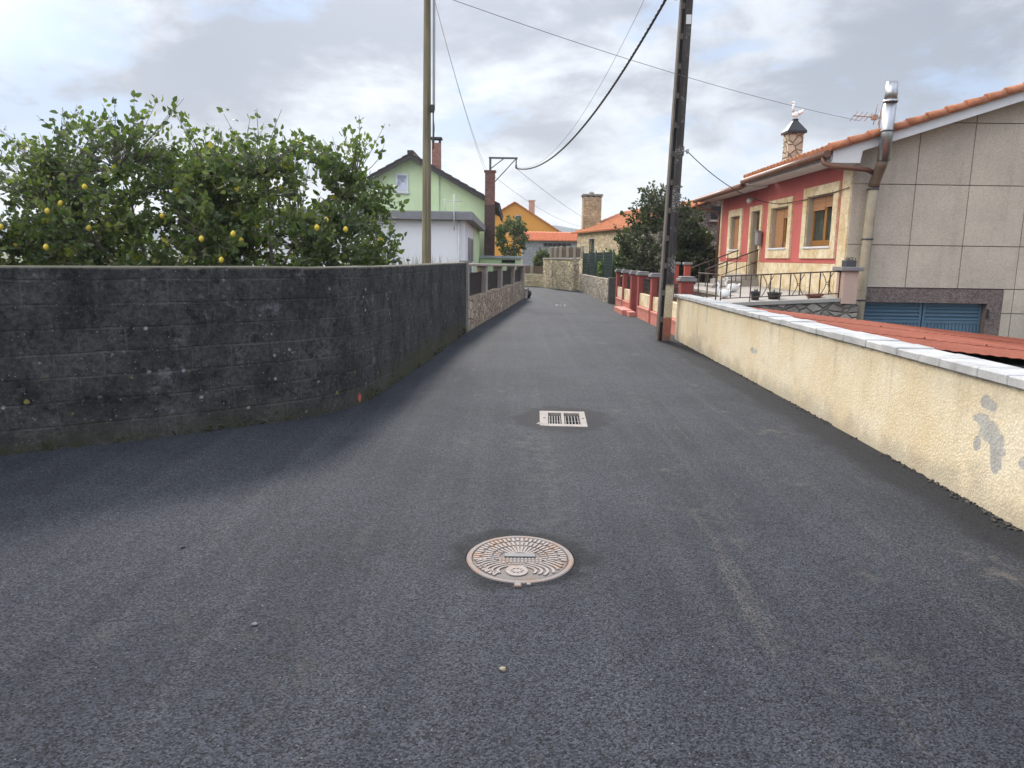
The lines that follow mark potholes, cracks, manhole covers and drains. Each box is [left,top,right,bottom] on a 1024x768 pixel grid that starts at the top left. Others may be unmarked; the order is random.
drain grate [536,411,588,427]
manhole cover [458,535,580,588]
